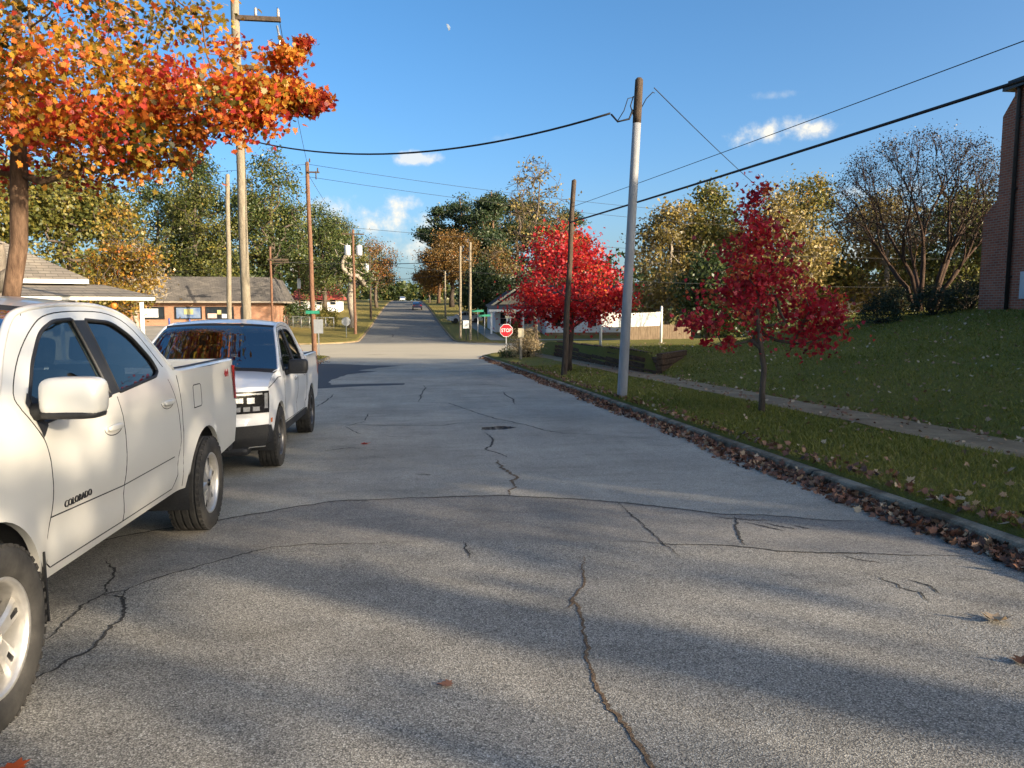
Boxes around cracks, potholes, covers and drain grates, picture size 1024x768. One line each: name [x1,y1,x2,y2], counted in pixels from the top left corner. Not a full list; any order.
crack [865,572,941,602]
crack [567,503,680,768]
crack [722,517,809,545]
crack [36,542,382,679]
crack [316,383,646,495]
